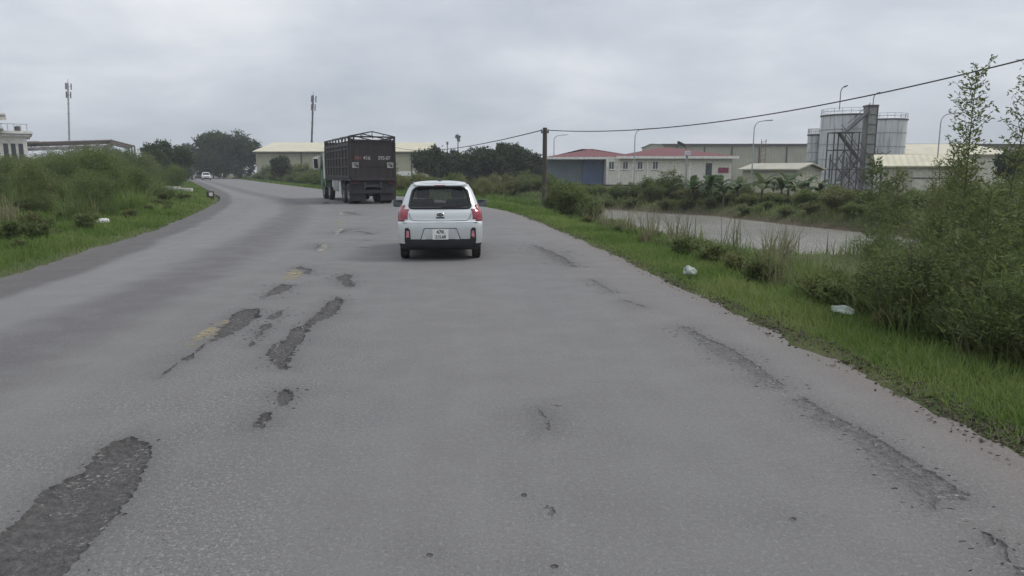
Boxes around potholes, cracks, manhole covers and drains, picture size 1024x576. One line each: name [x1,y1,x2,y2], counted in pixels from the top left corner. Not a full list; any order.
pothole [253,412,272,429]
crack [528,245,644,307]
pothole [0,435,160,576]
pothole [268,387,308,409]
pothole [265,295,354,369]
pothole [203,308,272,342]
pothole [328,273,366,288]
crack [538,405,562,430]
